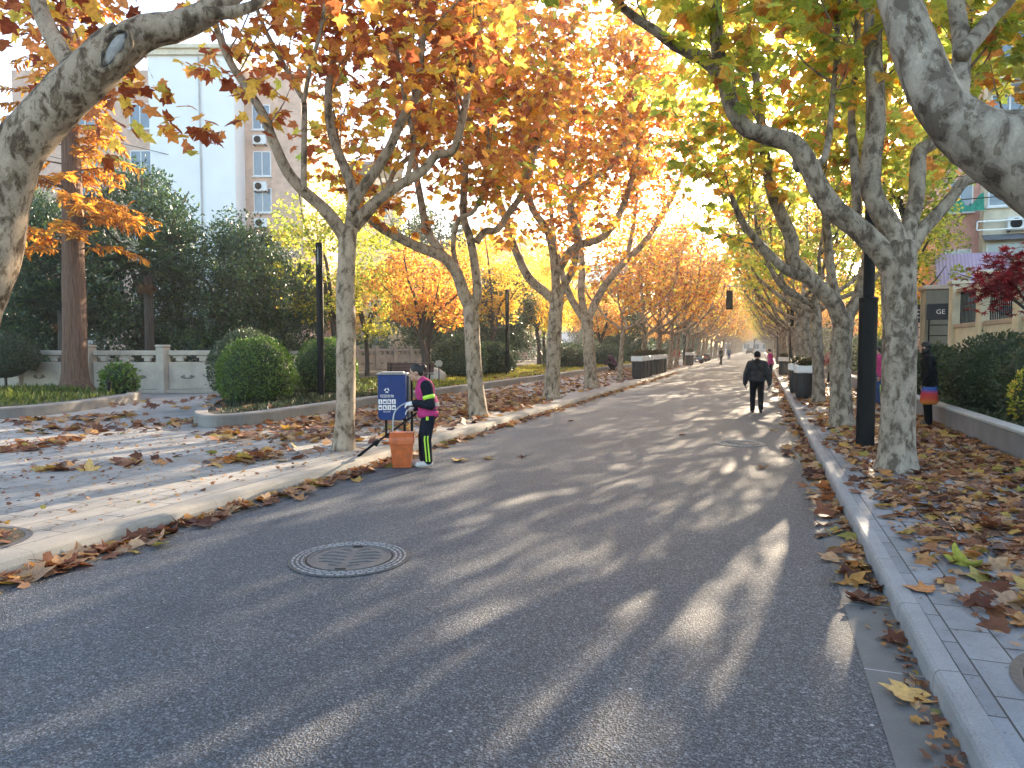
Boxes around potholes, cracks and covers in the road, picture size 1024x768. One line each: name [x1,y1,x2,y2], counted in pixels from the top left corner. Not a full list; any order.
manhole cover [288,541,409,577]
